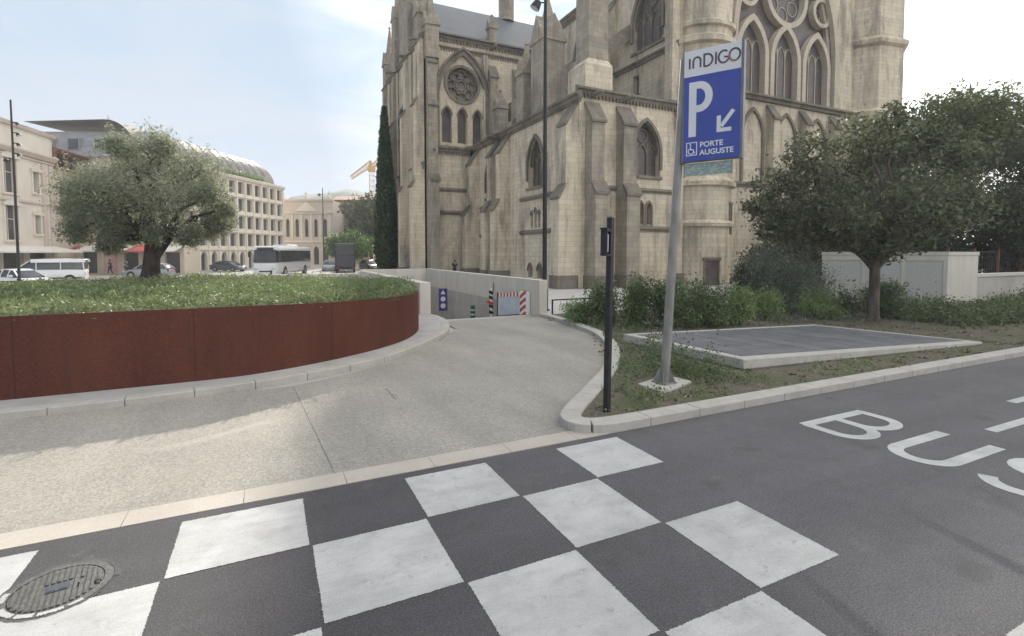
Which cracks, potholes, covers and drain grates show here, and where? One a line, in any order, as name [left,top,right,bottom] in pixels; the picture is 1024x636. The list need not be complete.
manhole cover [0,558,121,623]
